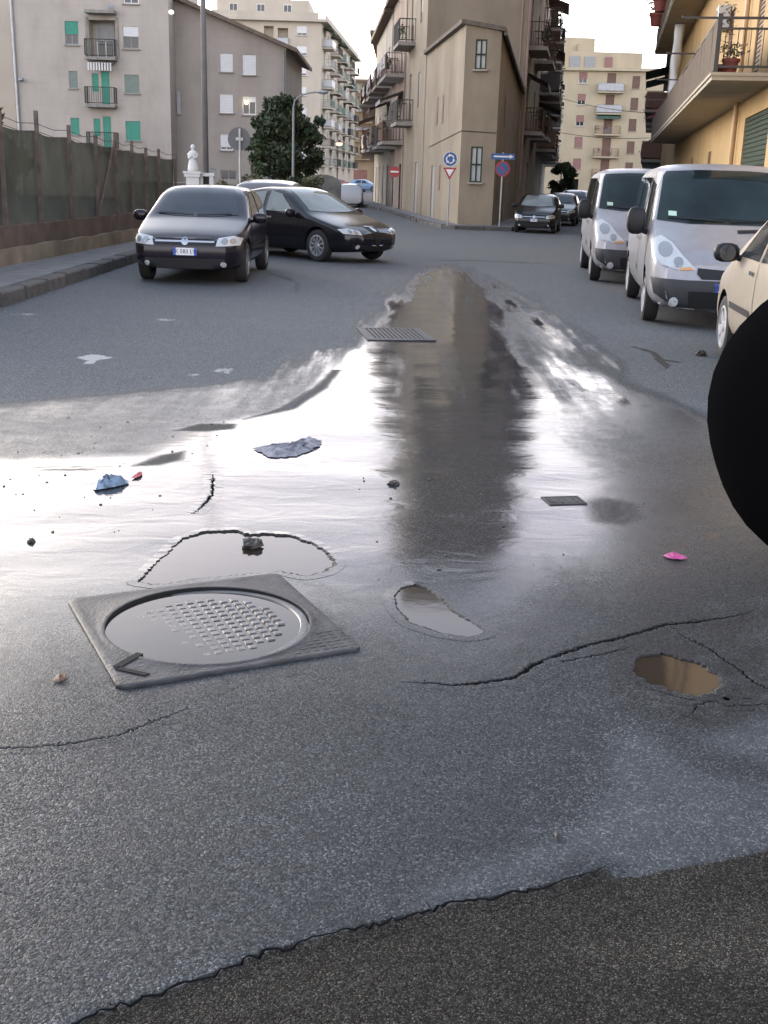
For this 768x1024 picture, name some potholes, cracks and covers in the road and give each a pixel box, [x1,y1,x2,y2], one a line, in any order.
manhole cover [68,573,360,689]
crack [397,607,768,720]
pothole [621,649,735,700]
pothole [383,581,497,641]
pothole [126,527,346,588]
crack [631,346,681,368]
crack [0,704,197,754]
crack [184,472,224,515]
